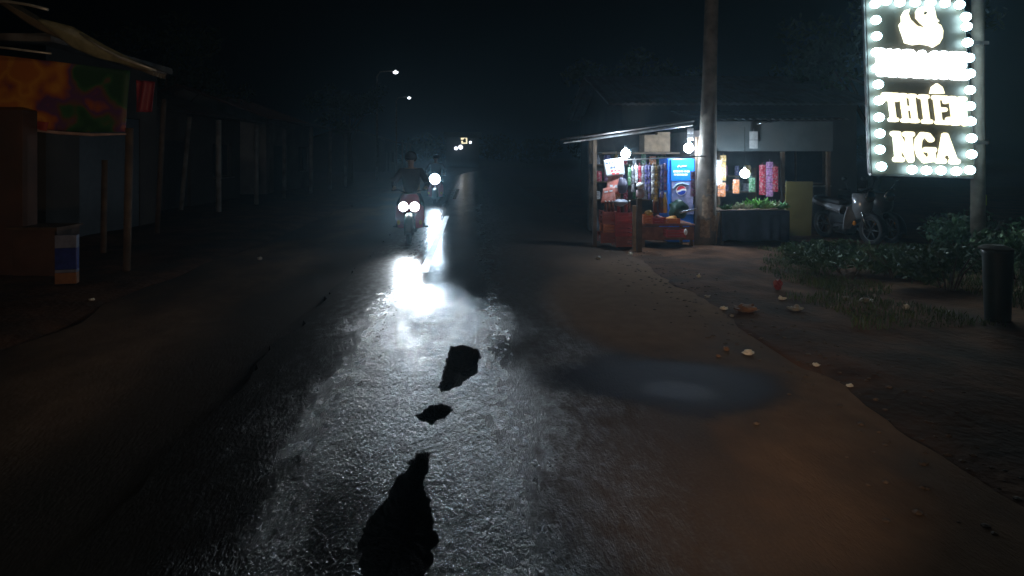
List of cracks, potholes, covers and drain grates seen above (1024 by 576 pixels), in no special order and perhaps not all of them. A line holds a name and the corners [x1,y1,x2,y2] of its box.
pothole [415,404,453,425]
pothole [438,345,482,392]
pothole [357,452,439,576]
